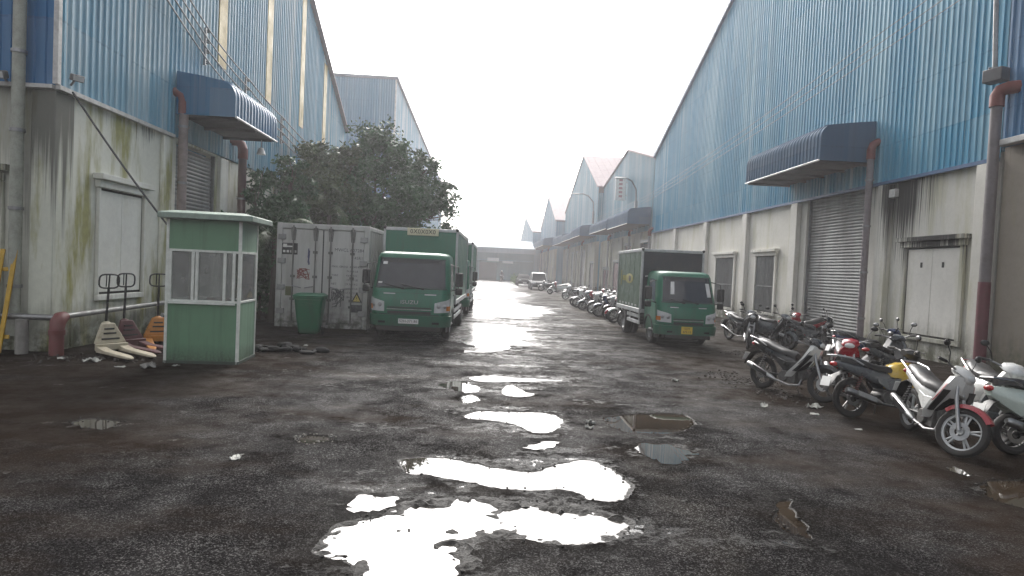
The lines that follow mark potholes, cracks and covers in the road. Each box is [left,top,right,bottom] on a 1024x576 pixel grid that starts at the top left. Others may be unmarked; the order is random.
pothole [501,384,541,397]
pothole [68,416,126,430]
pothole [599,411,700,435]
pothole [293,433,337,445]
pothole [769,497,818,541]
pothole [461,409,564,433]
pothole [974,478,1024,508]
pothole [393,456,635,502]
pothole [311,494,644,576]
